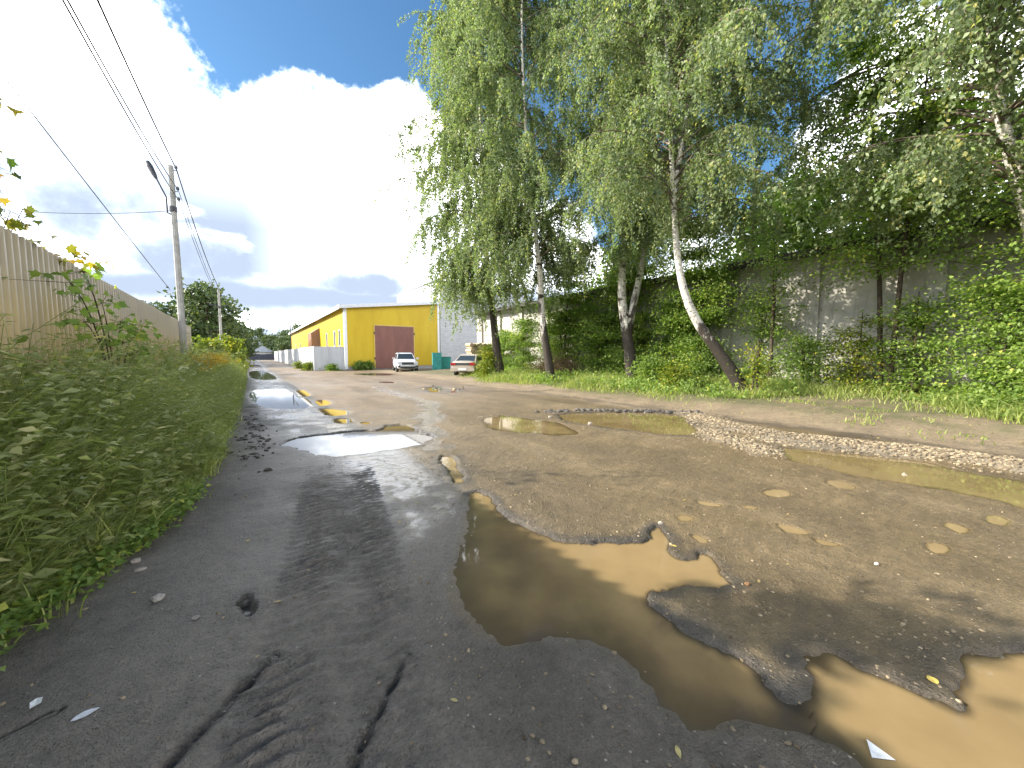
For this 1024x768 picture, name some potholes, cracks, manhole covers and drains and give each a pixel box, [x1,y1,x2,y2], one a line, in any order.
pothole [241,388,316,410]
pothole [805,536,850,550]
pothole [972,511,1023,529]
crack [336,654,418,768]
pothole [778,637,1024,768]
crack [138,655,285,768]
pothole [269,423,441,459]
pothole [935,519,982,538]
pothole [429,488,817,753]
pothole [434,453,472,485]
pothole [915,538,962,558]
pothole [226,590,270,622]
